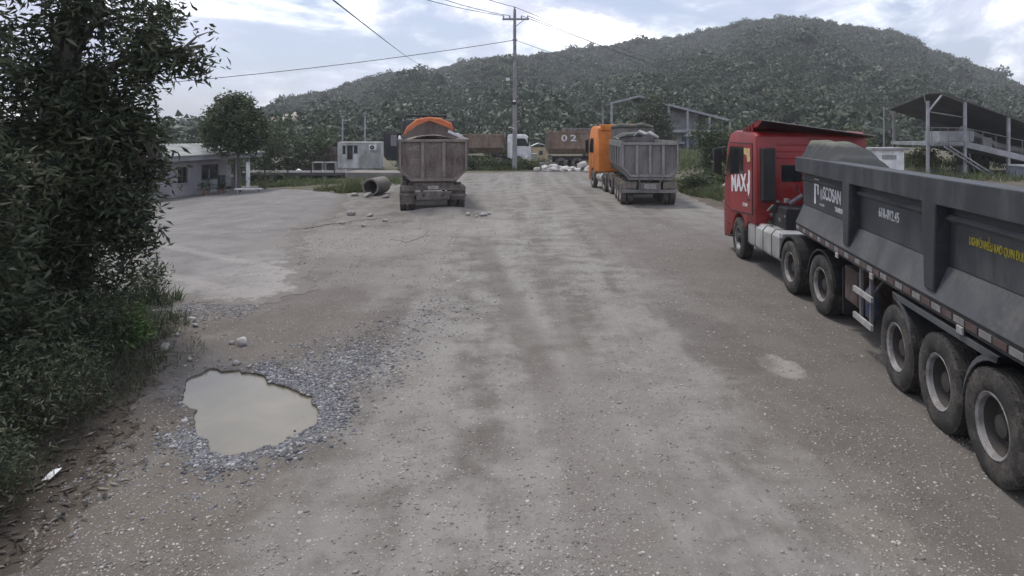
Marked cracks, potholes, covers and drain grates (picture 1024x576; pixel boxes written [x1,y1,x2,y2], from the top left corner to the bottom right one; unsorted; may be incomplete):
pothole [181,368,320,455]
